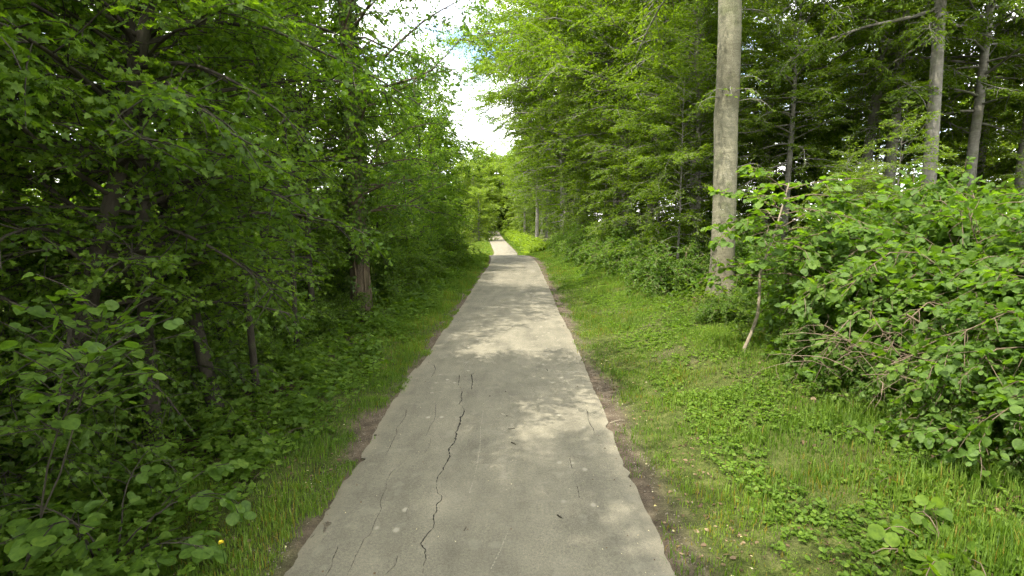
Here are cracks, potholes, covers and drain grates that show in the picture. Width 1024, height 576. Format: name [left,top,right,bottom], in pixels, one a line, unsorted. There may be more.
crack [420,374,473,576]
crack [326,415,406,575]
